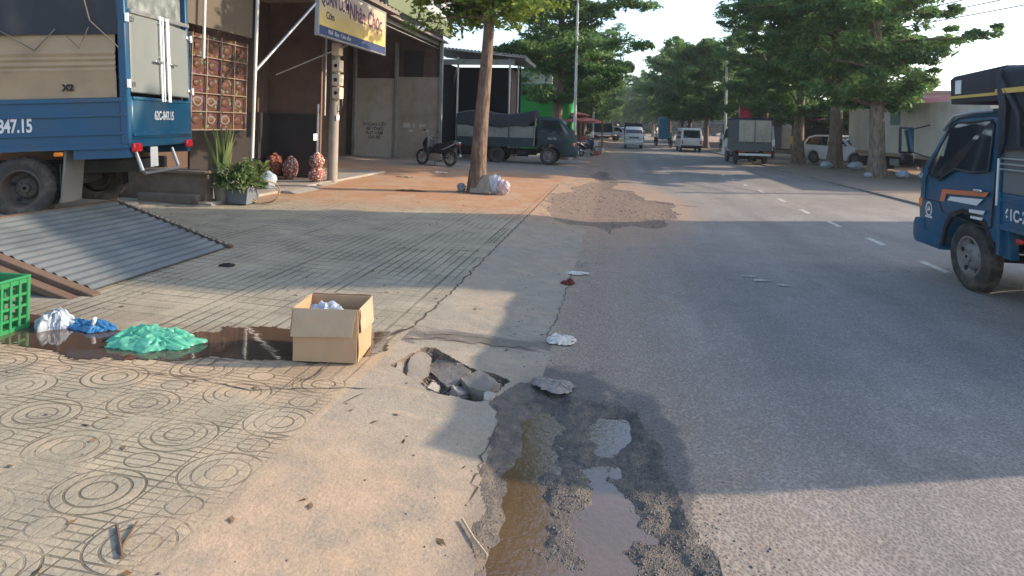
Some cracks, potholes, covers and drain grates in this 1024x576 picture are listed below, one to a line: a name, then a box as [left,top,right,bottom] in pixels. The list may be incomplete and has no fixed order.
pothole [390,347,510,402]
pothole [470,382,723,576]
